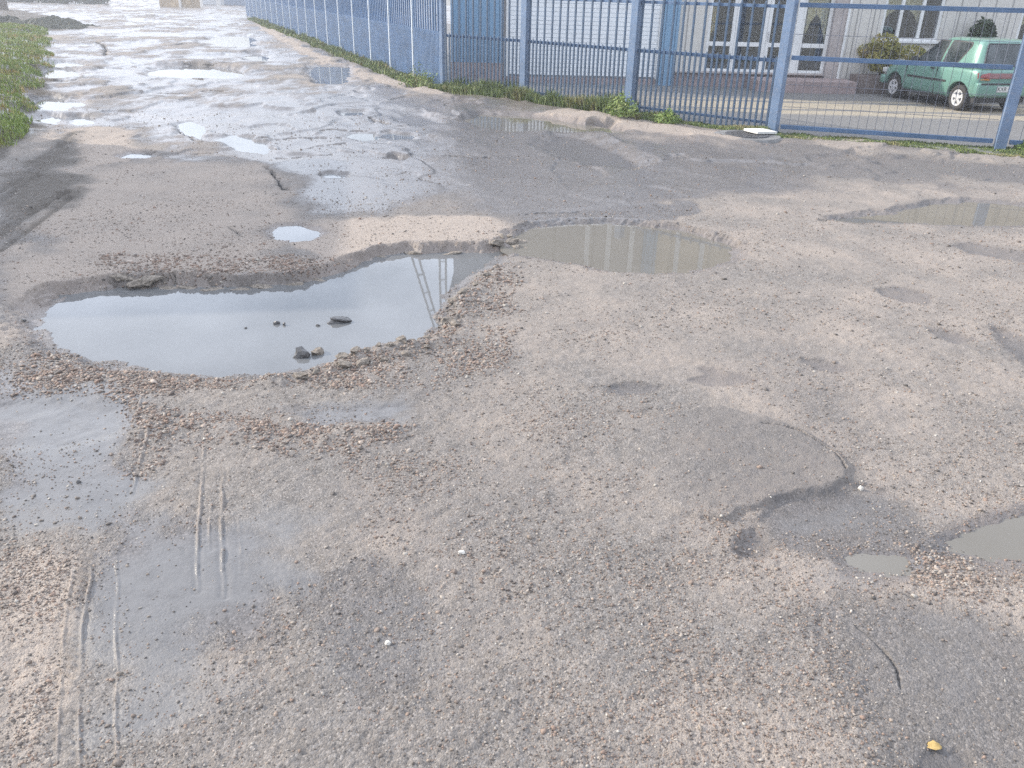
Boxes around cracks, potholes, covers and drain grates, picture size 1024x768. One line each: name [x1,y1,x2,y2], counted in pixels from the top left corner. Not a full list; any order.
crack [853,624,904,689]
pothole [930,497,1024,571]
pothole [133,60,269,80]
pothole [822,195,1024,228]
pothole [4,236,519,381]
pothole [262,219,334,242]
pothole [828,542,932,584]
crack [256,115,395,191]
pothole [493,216,751,275]
